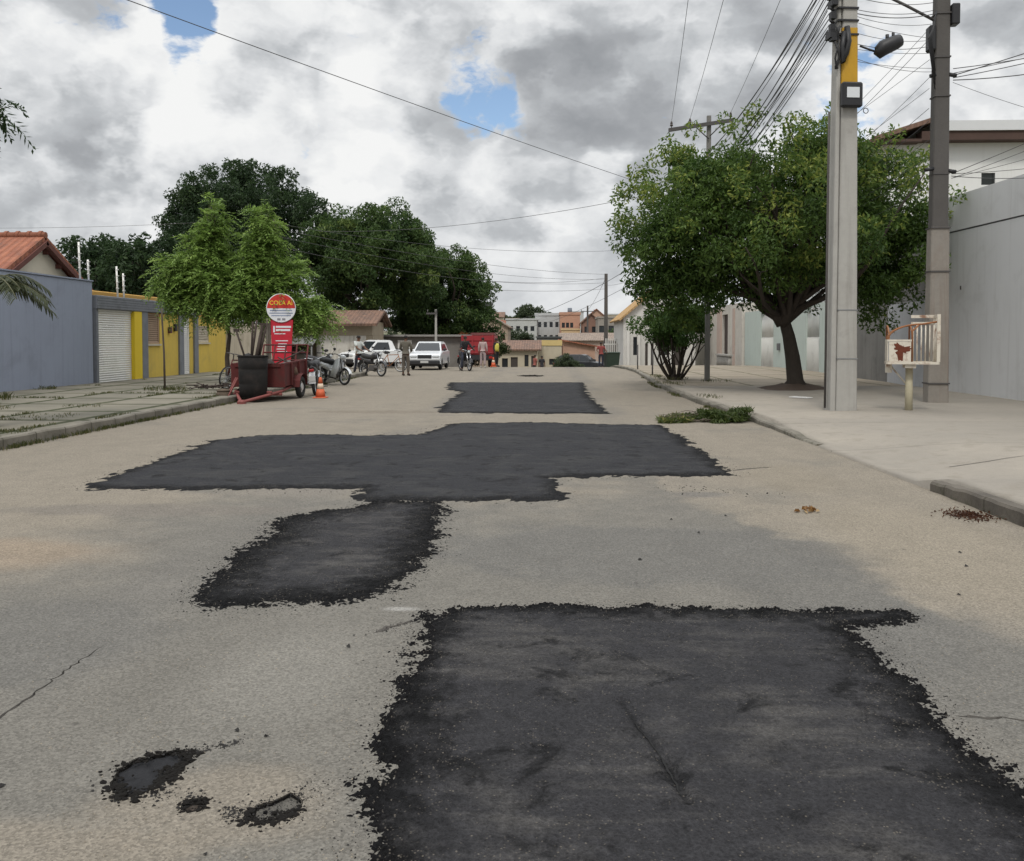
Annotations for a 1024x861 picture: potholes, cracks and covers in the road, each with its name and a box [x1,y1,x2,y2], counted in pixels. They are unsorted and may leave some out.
pothole [177,796,216,815]
crack [0,645,104,719]
crack [632,718,684,799]
pothole [230,791,307,832]
pothole [98,746,205,806]
